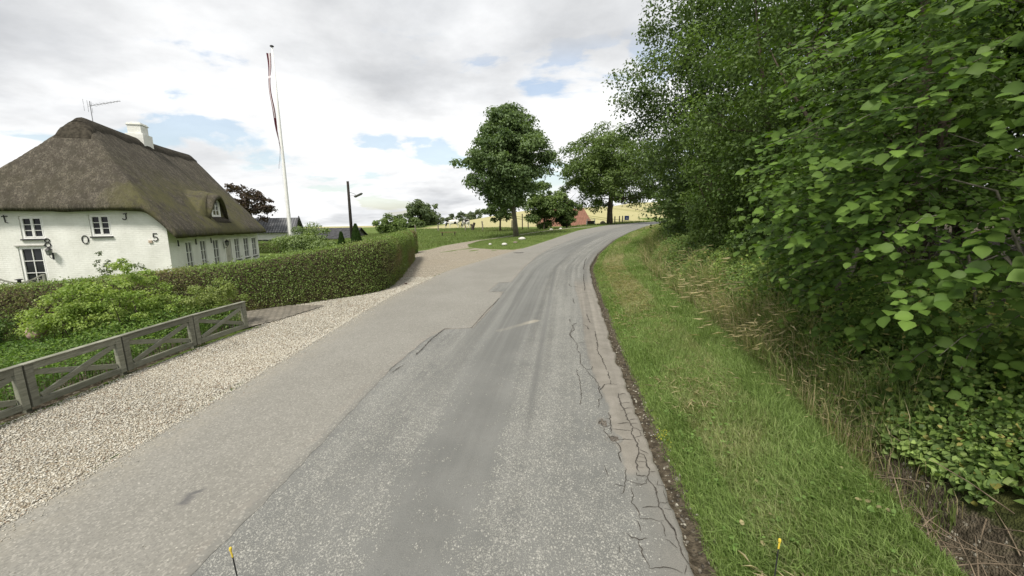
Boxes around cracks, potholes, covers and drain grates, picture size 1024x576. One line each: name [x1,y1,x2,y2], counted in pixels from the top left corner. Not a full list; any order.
crack [569,258,694,573]
